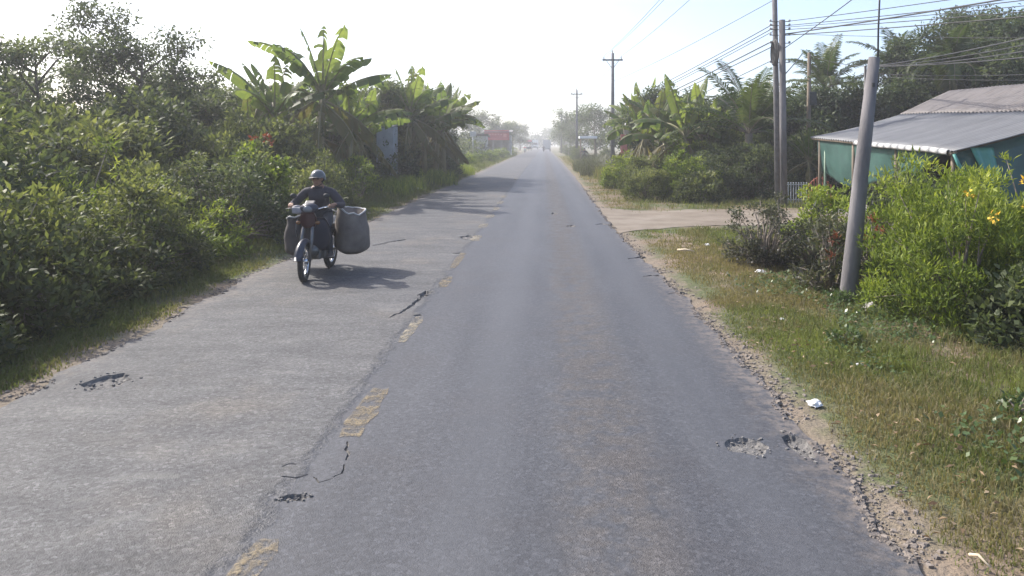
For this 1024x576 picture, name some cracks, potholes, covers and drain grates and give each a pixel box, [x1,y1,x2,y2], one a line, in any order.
crack [281,442,350,483]
pothole [74,372,143,392]
pothole [274,492,313,502]
crack [389,298,422,318]
pothole [780,429,820,463]
pothole [716,434,778,458]
